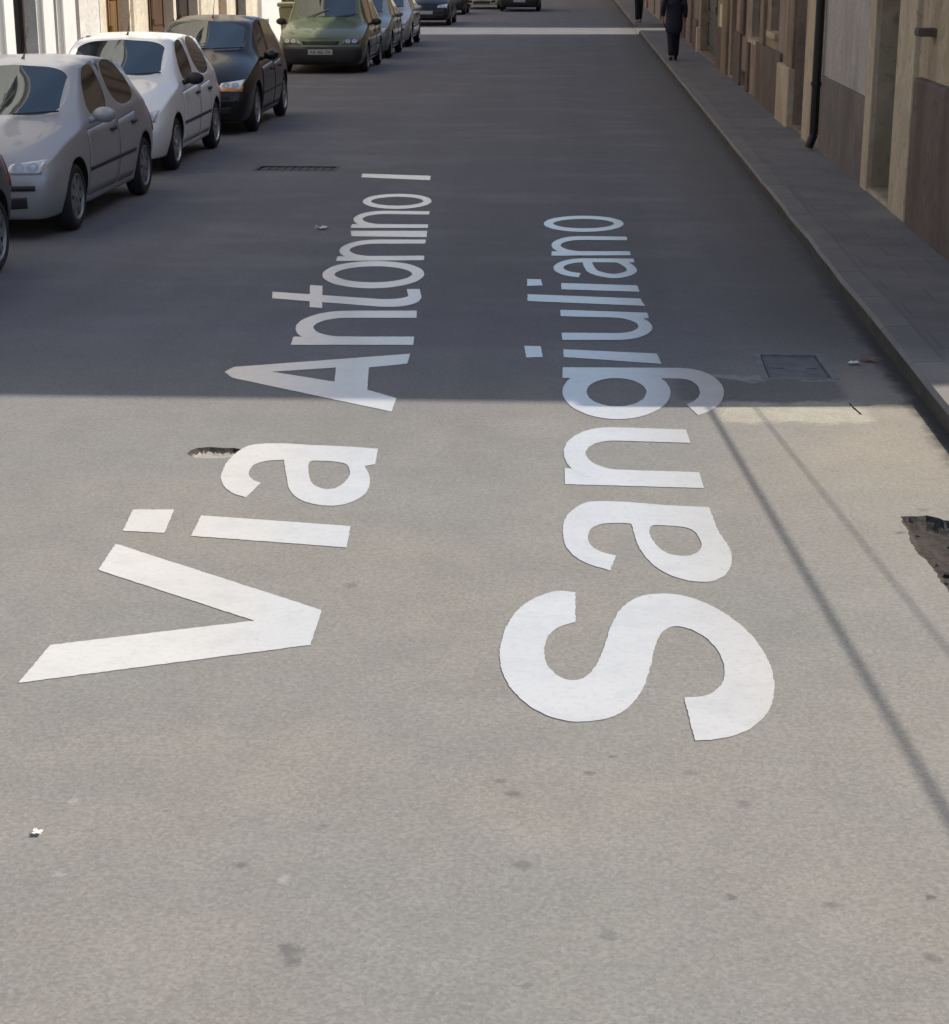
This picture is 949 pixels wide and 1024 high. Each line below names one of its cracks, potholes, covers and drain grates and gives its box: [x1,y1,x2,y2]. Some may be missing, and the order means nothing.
manhole cover [752,353,841,380]
pothole [187,447,241,458]
pothole [901,515,949,592]
